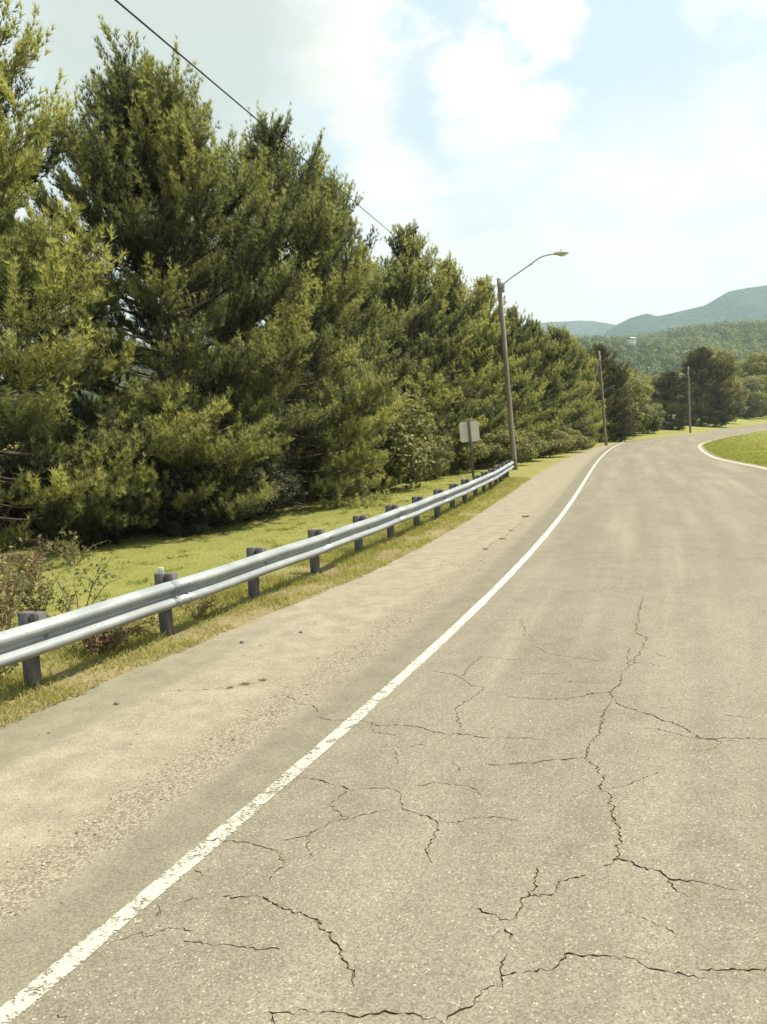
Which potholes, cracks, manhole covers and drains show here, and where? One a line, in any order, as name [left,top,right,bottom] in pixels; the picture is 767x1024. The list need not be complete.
crack [171,656,537,764]
crack [118,906,280,951]
crack [268,592,767,1024]
crack [183,762,522,987]
